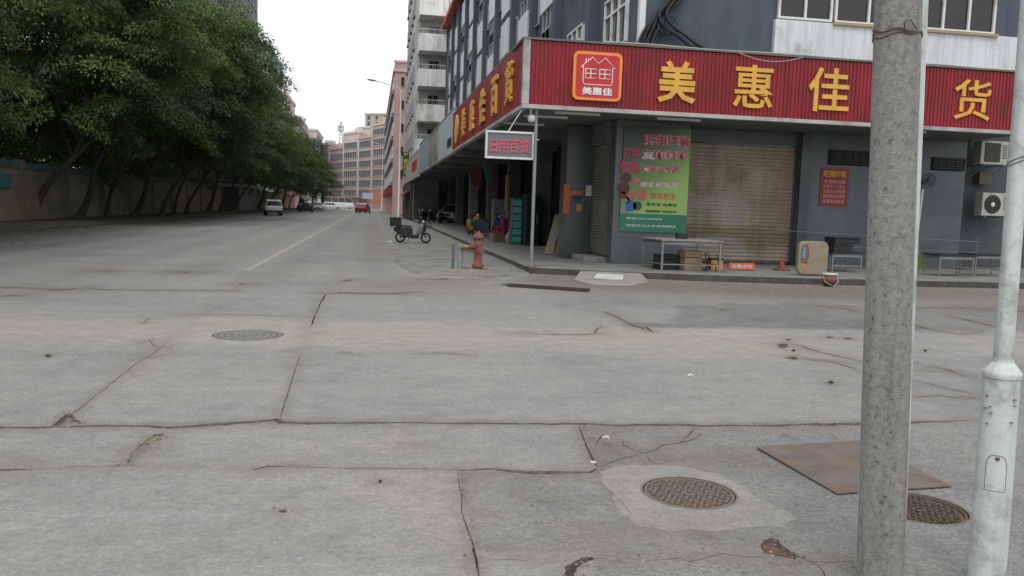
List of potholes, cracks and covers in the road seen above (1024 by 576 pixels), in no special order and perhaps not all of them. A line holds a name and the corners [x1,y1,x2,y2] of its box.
crack [789,343,859,370]
crack [596,428,701,468]
pothole [563,556,595,576]
pothole [127,434,163,463]
crack [518,311,653,335]
manhole cover [906,492,972,526]
manhole cover [640,476,739,510]
pothole [55,413,79,426]
manhole cover [211,330,284,341]
pothole [761,538,798,559]
crack [915,364,980,399]
